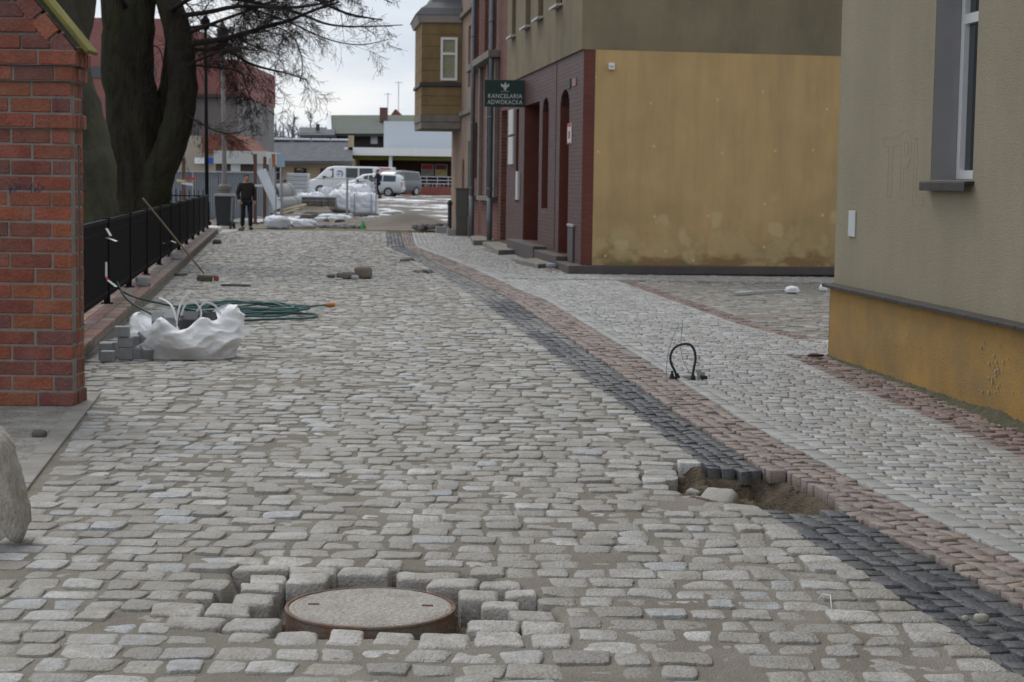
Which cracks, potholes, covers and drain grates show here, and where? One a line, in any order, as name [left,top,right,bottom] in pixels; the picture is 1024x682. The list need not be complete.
pothole [676,466,835,515]
manhole cover [284,587,456,640]
